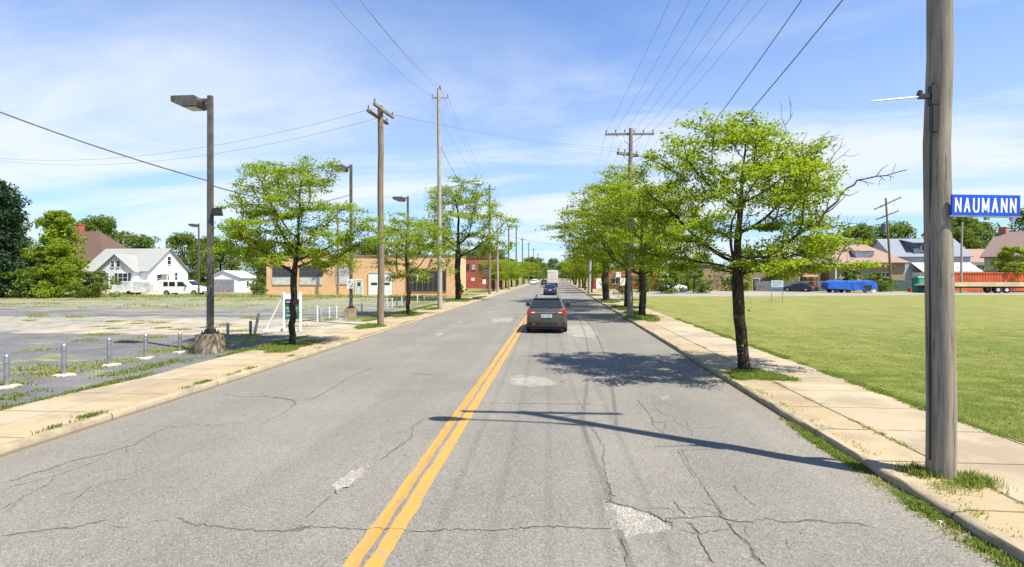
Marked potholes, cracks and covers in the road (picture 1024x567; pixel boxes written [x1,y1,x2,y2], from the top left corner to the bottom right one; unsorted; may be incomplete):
crack [177,418,628,565]
crack [6,367,368,511]
crack [3,517,155,536]
crack [637,399,872,566]
